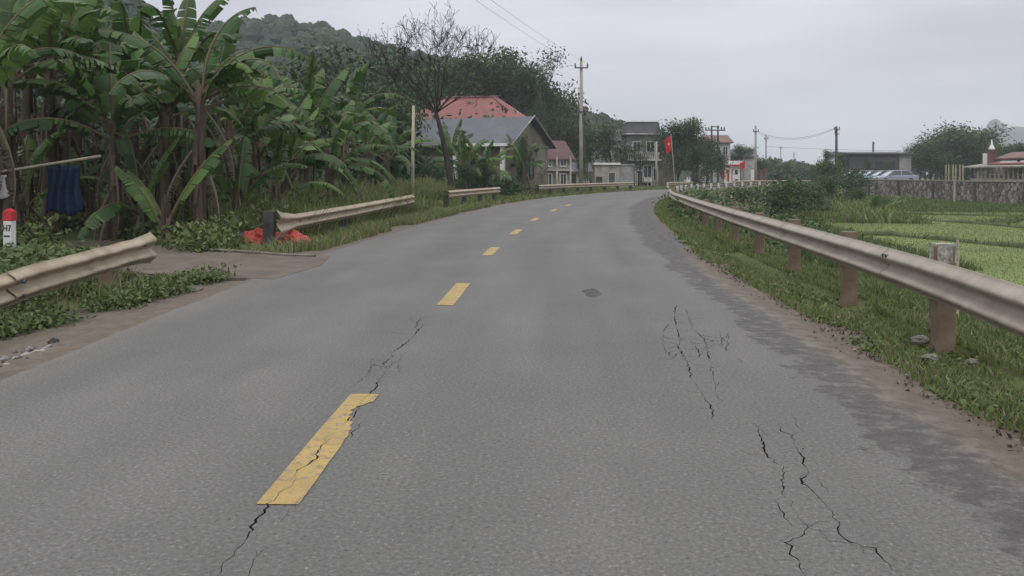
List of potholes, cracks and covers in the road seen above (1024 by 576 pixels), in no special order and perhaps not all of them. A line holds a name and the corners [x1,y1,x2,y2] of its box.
crack [741,418,900,576]
crack [217,316,431,576]
crack [645,305,742,417]
